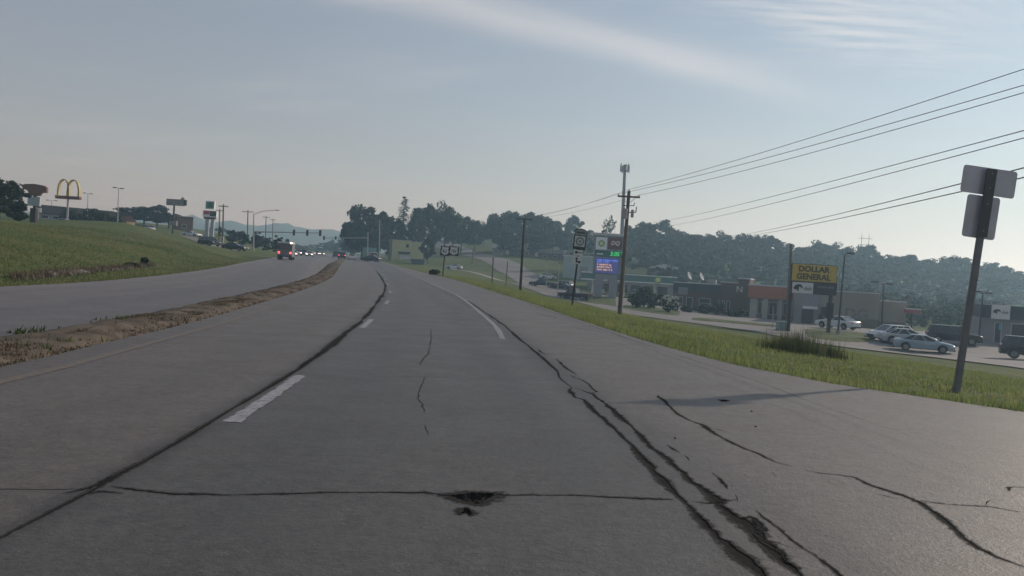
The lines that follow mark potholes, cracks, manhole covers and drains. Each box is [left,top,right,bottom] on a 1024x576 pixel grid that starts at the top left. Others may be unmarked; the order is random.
pothole [454,507,479,516]
pothole [437,490,507,506]
crack [0,293,1023,576]
